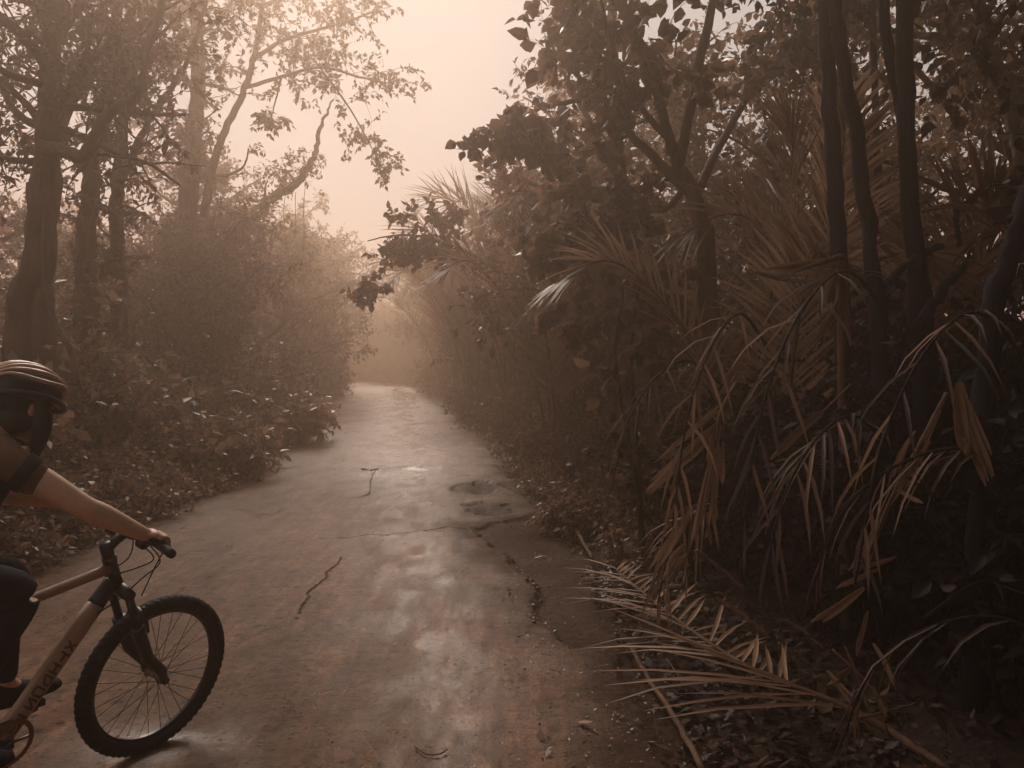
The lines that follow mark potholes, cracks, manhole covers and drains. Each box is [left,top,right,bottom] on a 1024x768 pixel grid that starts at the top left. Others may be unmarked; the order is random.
crack [507,587,516,603]
crack [329,526,468,538]
pothole [460,500,521,516]
pothole [447,479,503,496]
crack [308,467,421,499]
crack [295,557,343,619]
